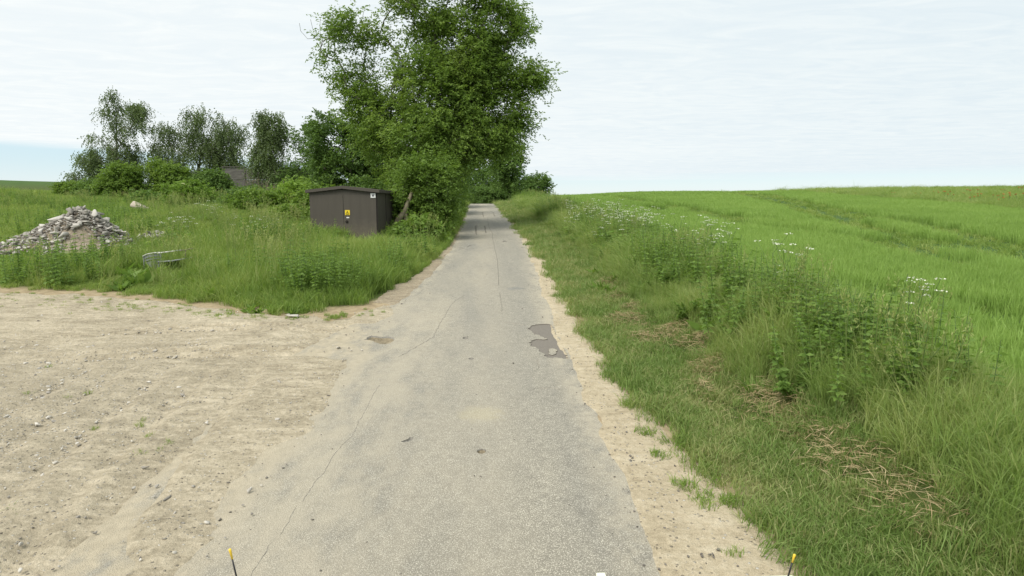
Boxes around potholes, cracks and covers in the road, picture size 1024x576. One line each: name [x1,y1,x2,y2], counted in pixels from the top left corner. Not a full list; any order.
crack [463,212,523,325]
crack [251,296,463,576]
pothole [528,324,568,359]
